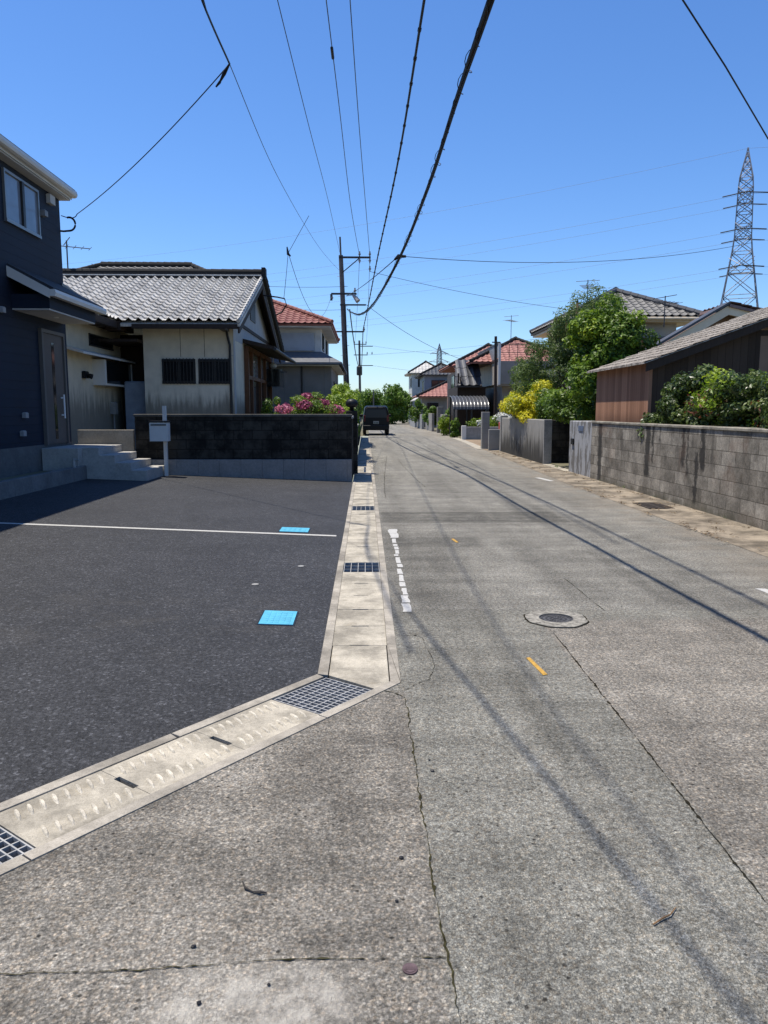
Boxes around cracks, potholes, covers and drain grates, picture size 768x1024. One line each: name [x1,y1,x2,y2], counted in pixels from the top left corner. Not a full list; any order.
crack [557,637,768,904]
crack [0,634,461,1023]
manhole cover [523,610,590,628]
